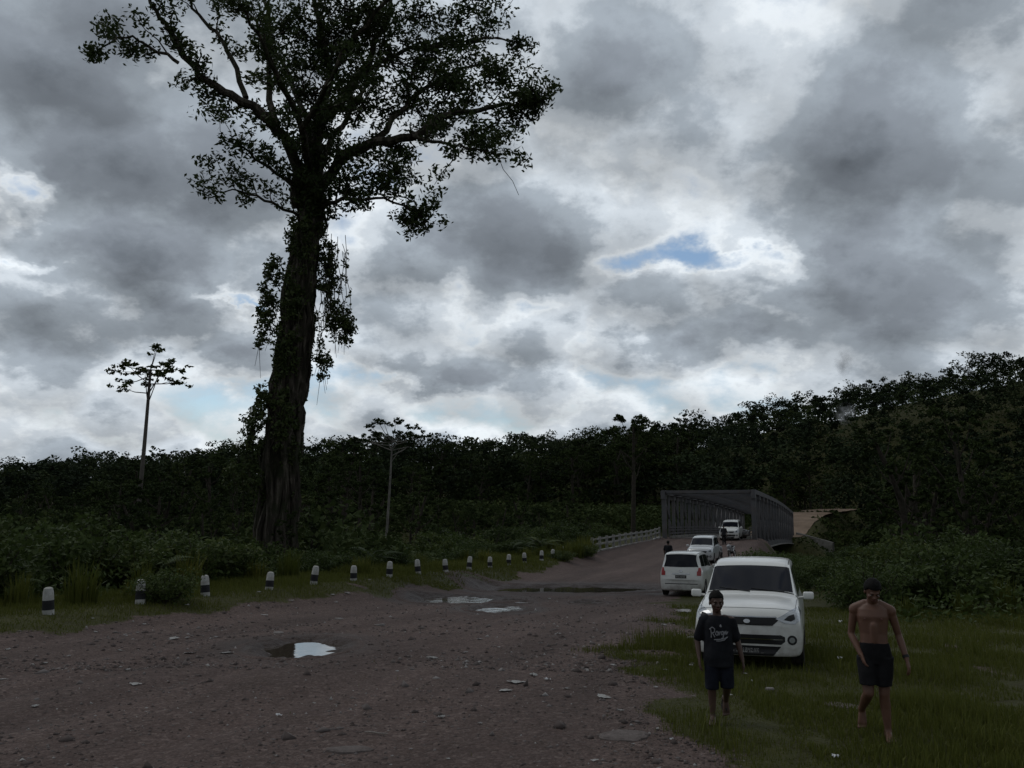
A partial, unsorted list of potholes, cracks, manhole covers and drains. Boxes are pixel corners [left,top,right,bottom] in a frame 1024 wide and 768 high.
pothole [460,603,535,614]
pothole [392,587,522,604]
pothole [231,634,365,660]
